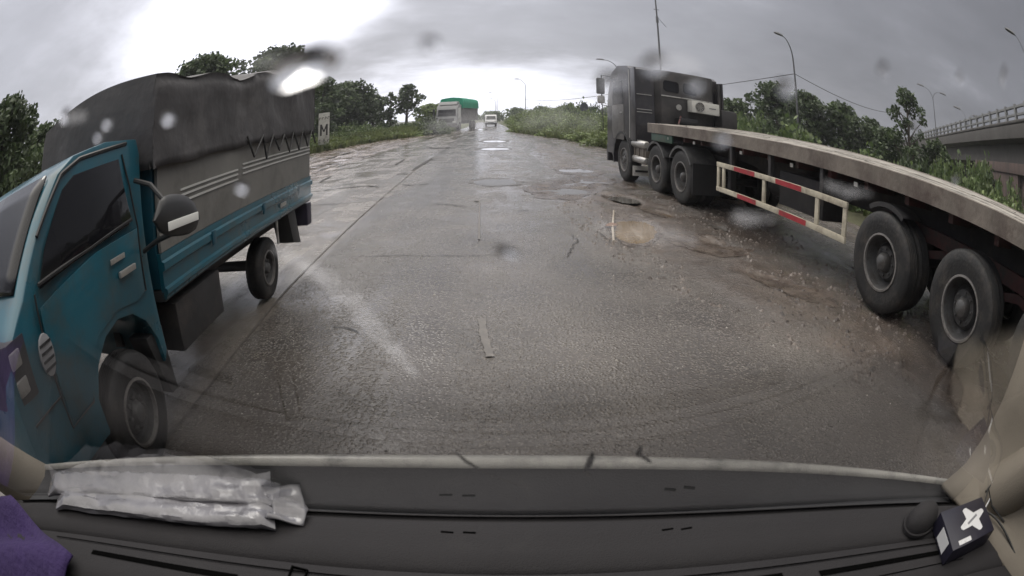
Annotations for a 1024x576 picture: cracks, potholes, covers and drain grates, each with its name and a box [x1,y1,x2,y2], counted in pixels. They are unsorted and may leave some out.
pothole [554,167,605,176]
pothole [523,180,607,200]
crack [311,144,443,205]
pothole [468,178,525,187]
pothole [605,213,664,247]
pothole [664,233,755,257]
pothole [602,194,642,207]
